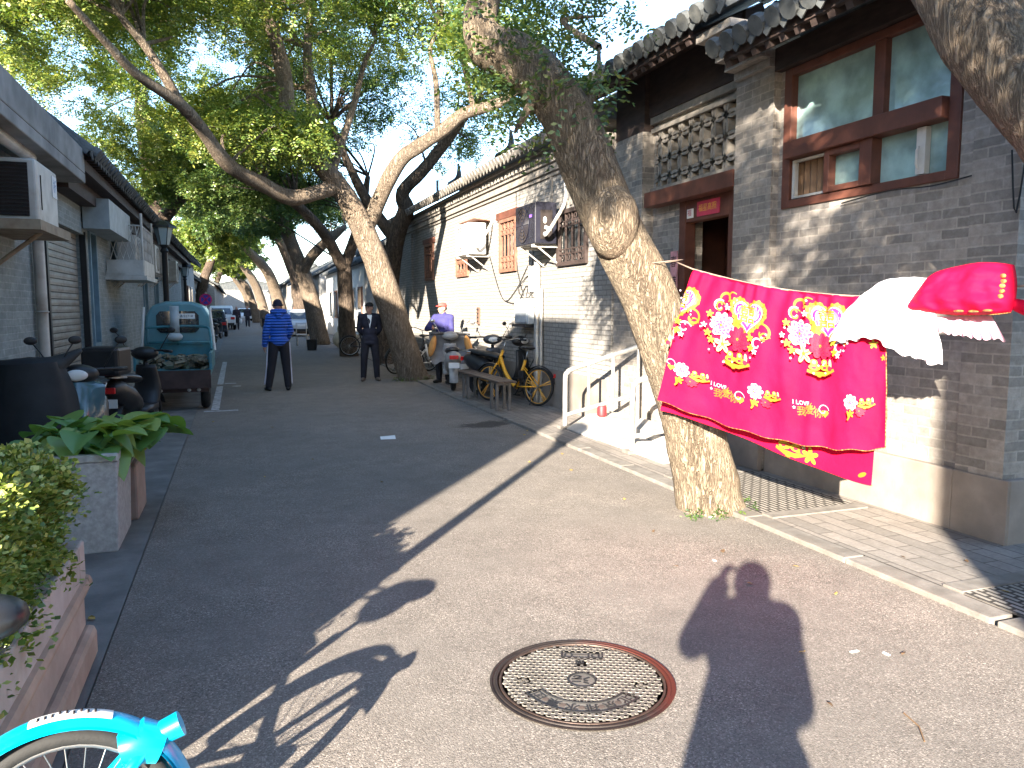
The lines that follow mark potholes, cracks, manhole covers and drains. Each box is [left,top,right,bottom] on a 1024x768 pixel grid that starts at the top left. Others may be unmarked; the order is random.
manhole cover [490,640,676,731]
